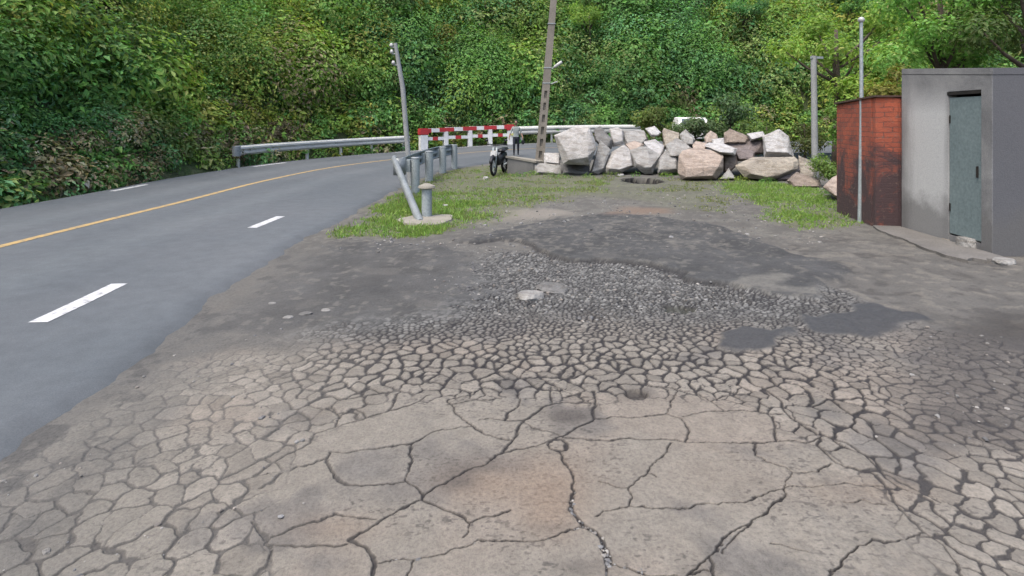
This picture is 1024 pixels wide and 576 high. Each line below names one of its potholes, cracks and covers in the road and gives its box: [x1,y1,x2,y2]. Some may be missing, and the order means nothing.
pothole [460,240,756,322]
crack [0,251,1024,576]
pothole [624,388,649,400]
